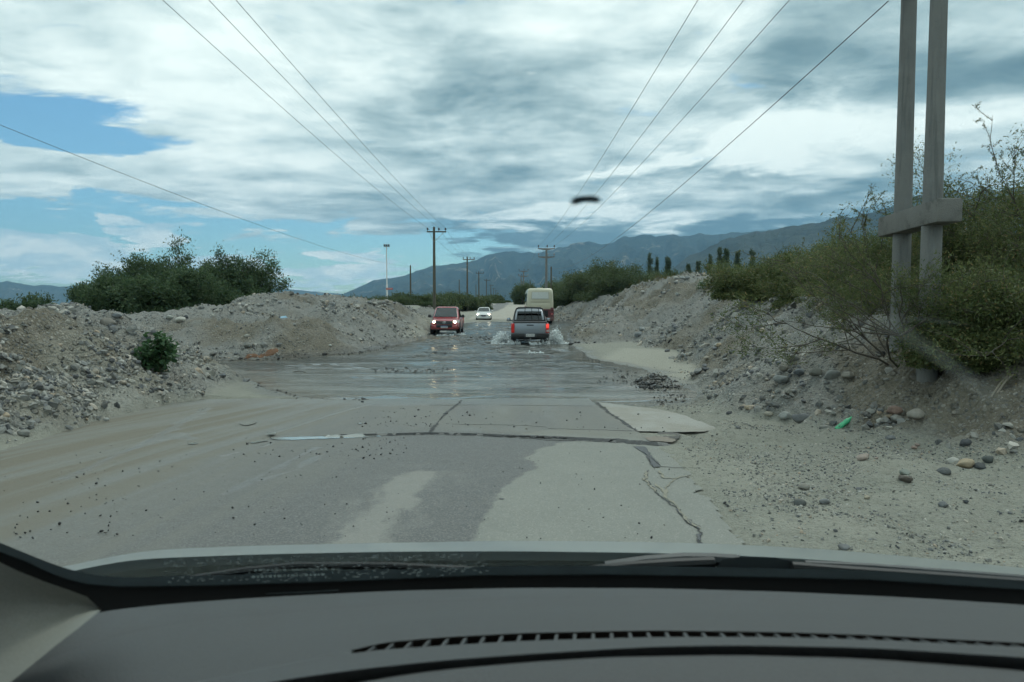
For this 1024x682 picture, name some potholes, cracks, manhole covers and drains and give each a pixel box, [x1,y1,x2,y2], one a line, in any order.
crack [643,466,703,543]
crack [340,400,703,445]
